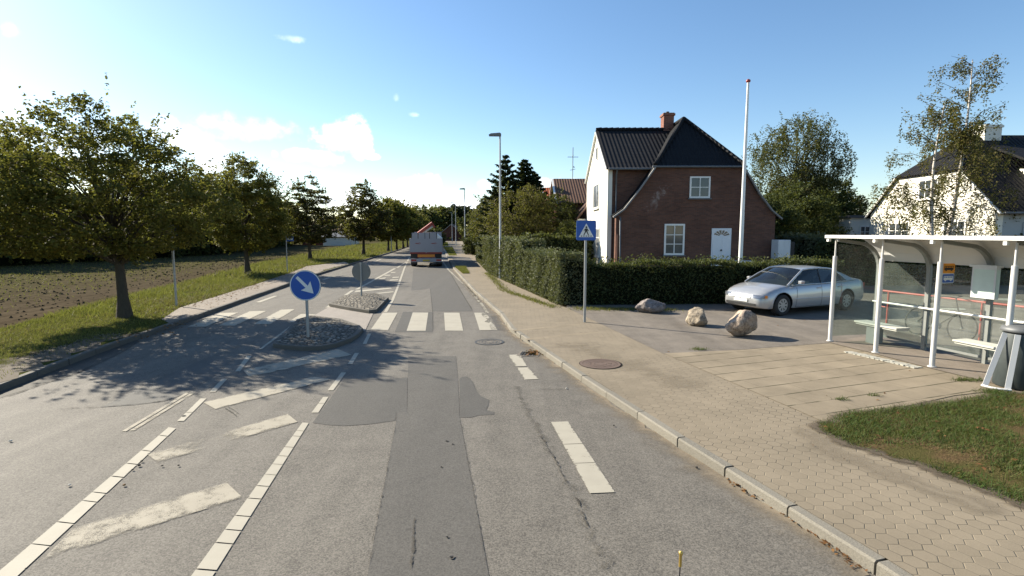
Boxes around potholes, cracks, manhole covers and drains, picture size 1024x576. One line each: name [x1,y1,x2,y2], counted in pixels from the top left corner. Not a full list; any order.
crack [517,388,614,567]
manhole cover [579,359,623,369]
